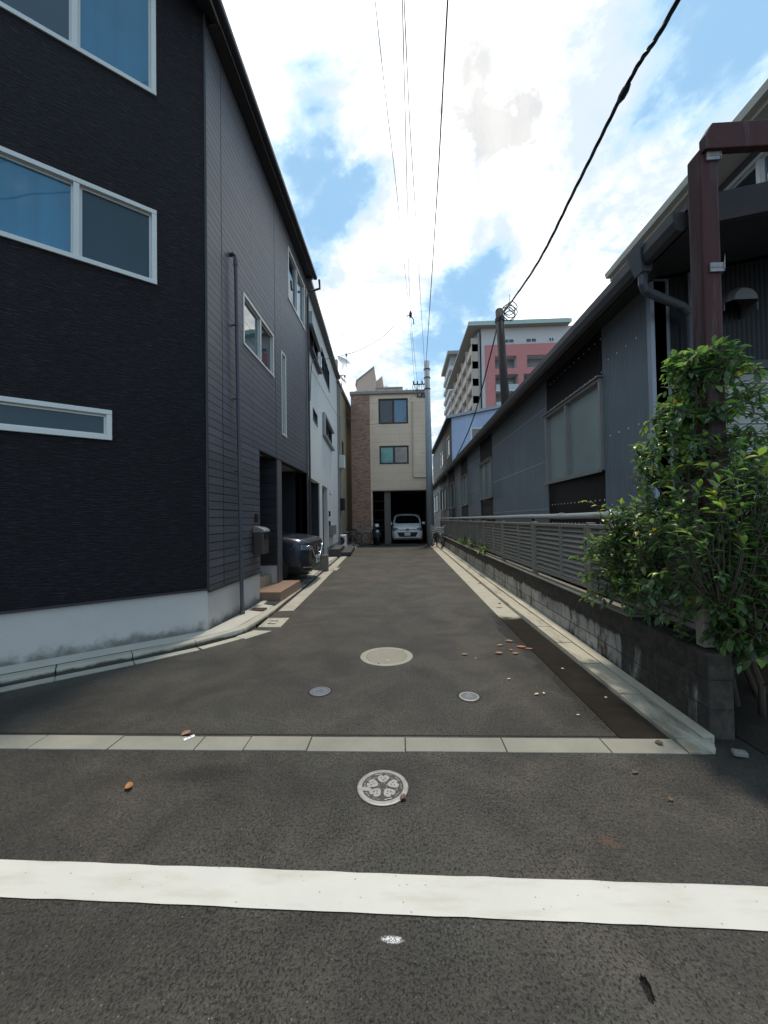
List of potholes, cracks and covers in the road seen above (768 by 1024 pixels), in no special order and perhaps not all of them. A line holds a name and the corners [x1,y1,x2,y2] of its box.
manhole cover [360,647,413,666]
utility cover [457,691,481,702]
manhole cover [356,770,409,806]
drain grate [258,618,289,628]
utility cover [308,686,332,697]
pothole [639,973,655,1004]
